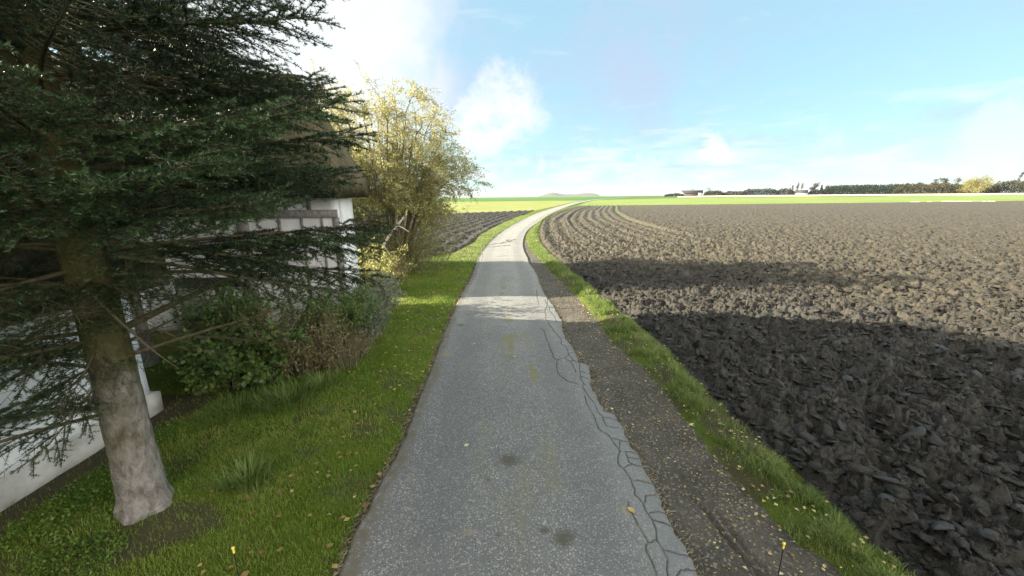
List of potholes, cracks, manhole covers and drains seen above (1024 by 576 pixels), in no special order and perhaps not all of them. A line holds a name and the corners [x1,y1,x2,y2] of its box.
crack [536,290,588,392]
crack [584,393,695,576]
